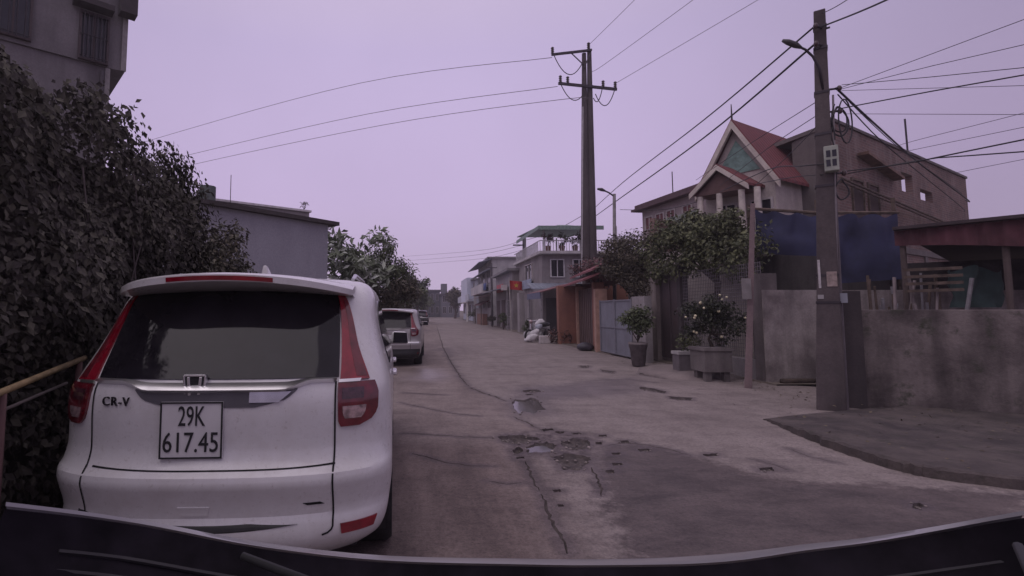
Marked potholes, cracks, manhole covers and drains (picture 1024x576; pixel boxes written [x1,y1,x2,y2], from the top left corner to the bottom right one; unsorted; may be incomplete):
pothole [492,434,545,444]
pothole [560,438,595,450]
crack [416,454,471,466]
pothole [550,450,591,473]
crack [591,467,603,496]
pothole [524,440,556,453]
pothole [510,396,546,415]
crack [470,387,537,428]
